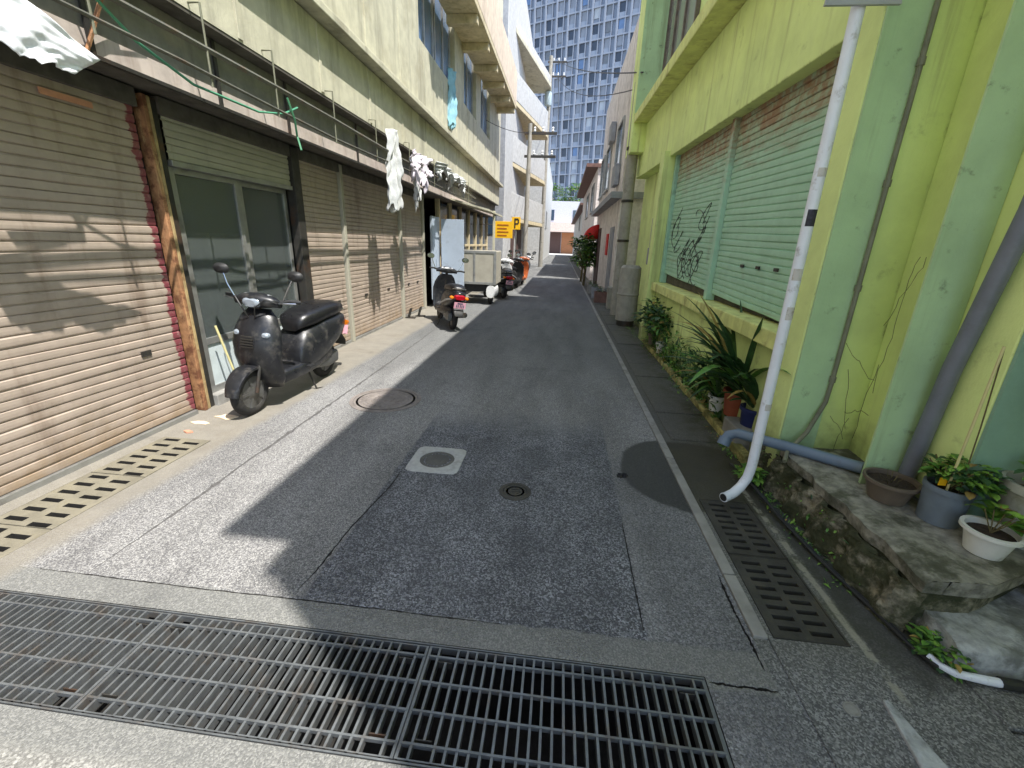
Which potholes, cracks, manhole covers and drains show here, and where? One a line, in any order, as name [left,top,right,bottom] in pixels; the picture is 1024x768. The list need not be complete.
crack [705,573,780,696]
manhole cover [349,388,421,413]
drain grate [72,614,430,760]
manhole cover [405,446,466,474]
drain grate [394,646,732,768]
manhole cover [499,483,531,501]
drain grate [0,592,172,711]
